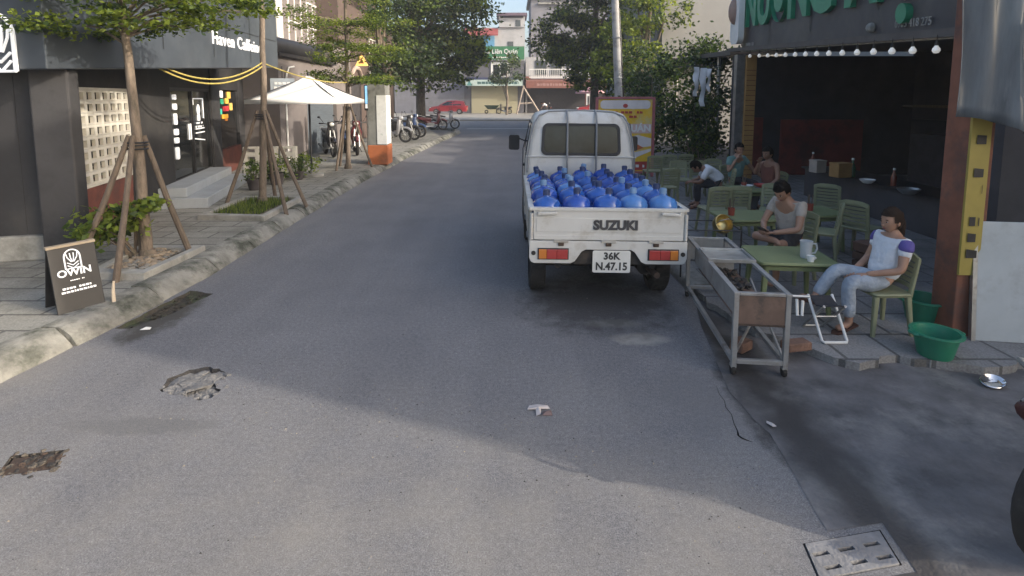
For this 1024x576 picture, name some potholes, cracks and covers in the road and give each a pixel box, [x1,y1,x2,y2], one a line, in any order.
crack [716,386,752,442]
pothole [159,367,231,400]
